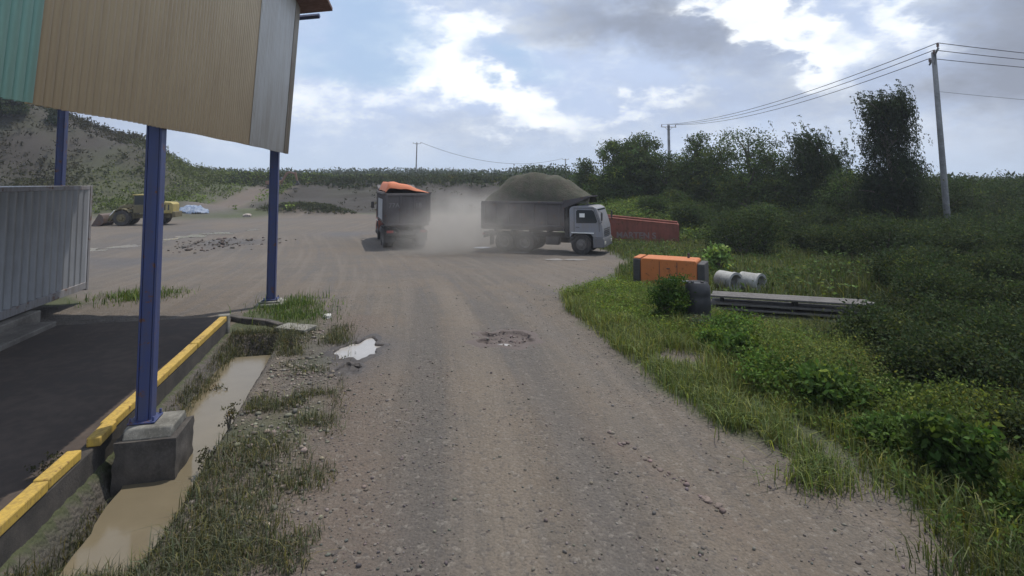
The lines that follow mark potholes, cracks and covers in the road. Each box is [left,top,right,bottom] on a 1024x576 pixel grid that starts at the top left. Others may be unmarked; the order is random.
pothole [465,329,544,350]
pothole [324,333,390,366]
